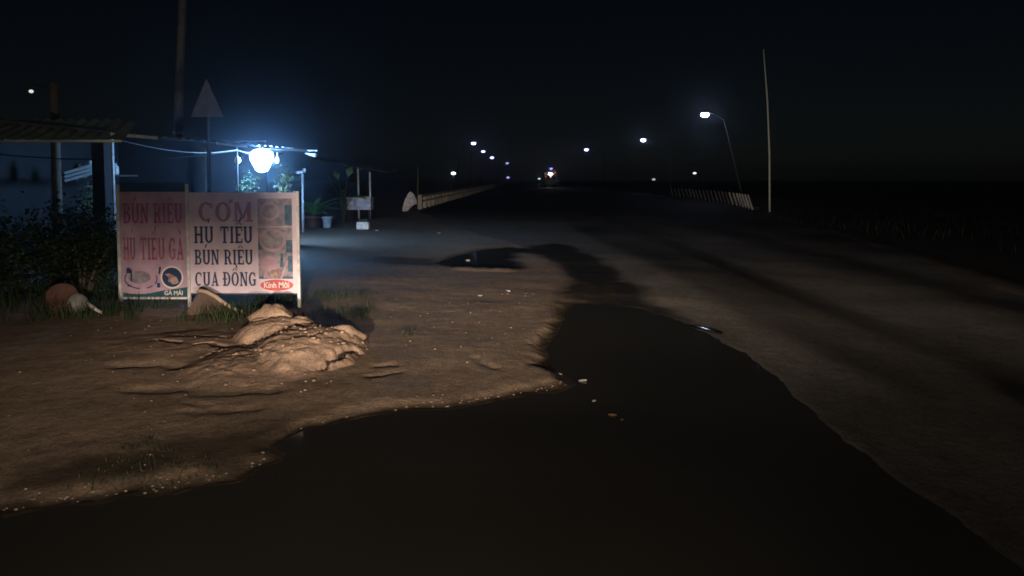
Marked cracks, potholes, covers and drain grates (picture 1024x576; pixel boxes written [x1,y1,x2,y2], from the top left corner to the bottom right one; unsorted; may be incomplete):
pothole [435,247,532,269]
pothole [0,303,1024,576]
